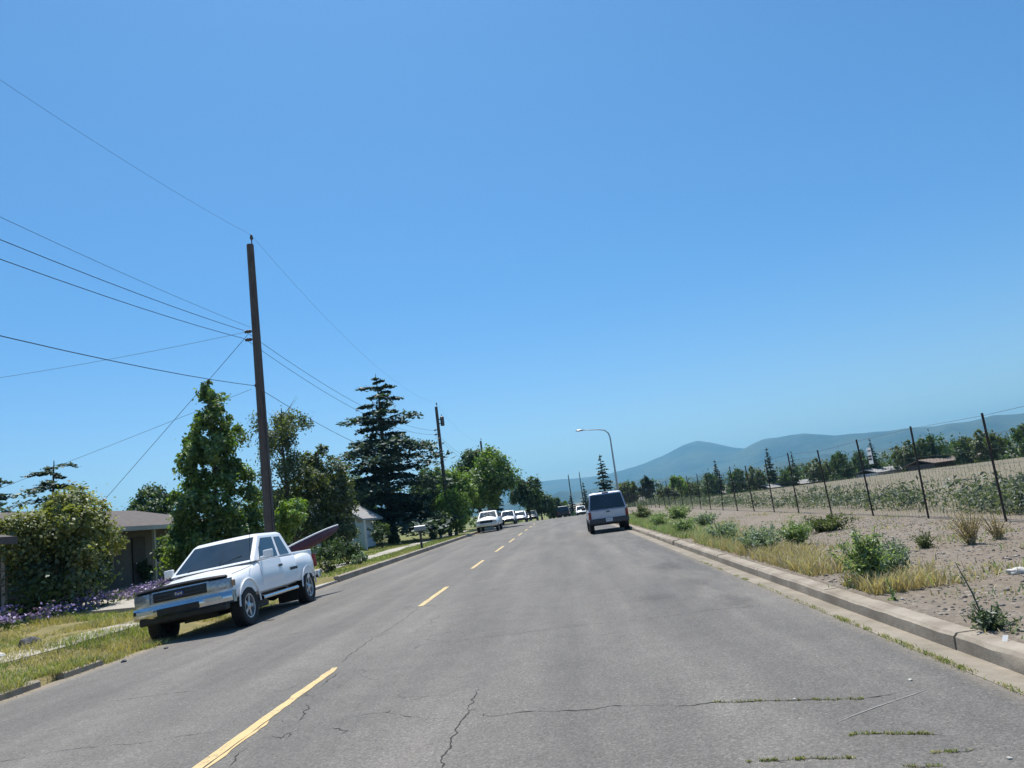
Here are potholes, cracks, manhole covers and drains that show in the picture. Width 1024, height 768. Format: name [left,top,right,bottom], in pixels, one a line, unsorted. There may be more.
crack [849,730,979,768]
crack [369,692,477,768]
crack [483,693,894,716]
crack [746,754,856,763]
